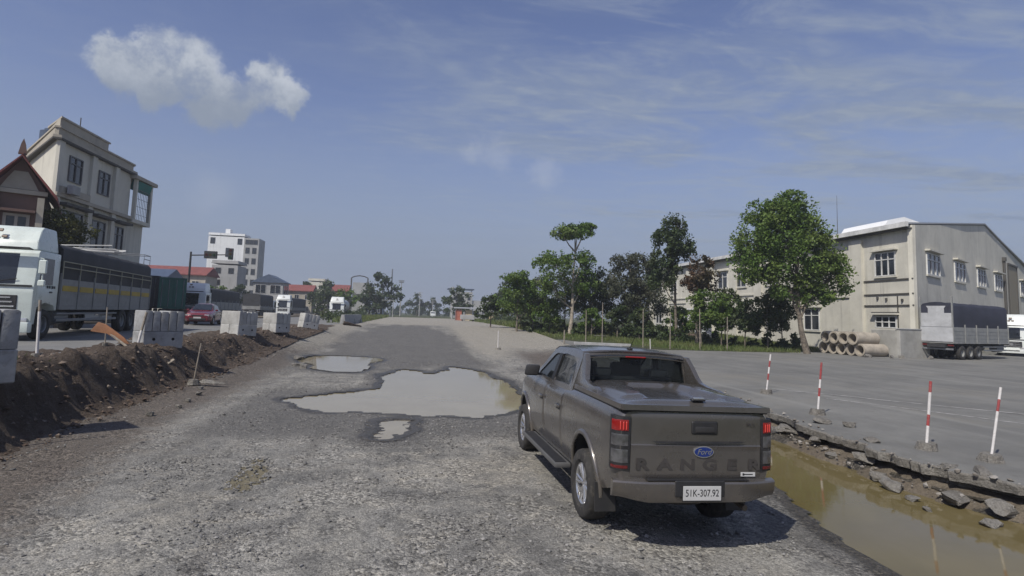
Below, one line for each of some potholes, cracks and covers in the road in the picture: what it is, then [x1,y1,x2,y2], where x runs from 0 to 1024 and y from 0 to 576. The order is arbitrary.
pothole [292,354,386,373]
pothole [766,431,1024,576]
pothole [360,417,423,442]
pothole [275,366,522,419]
